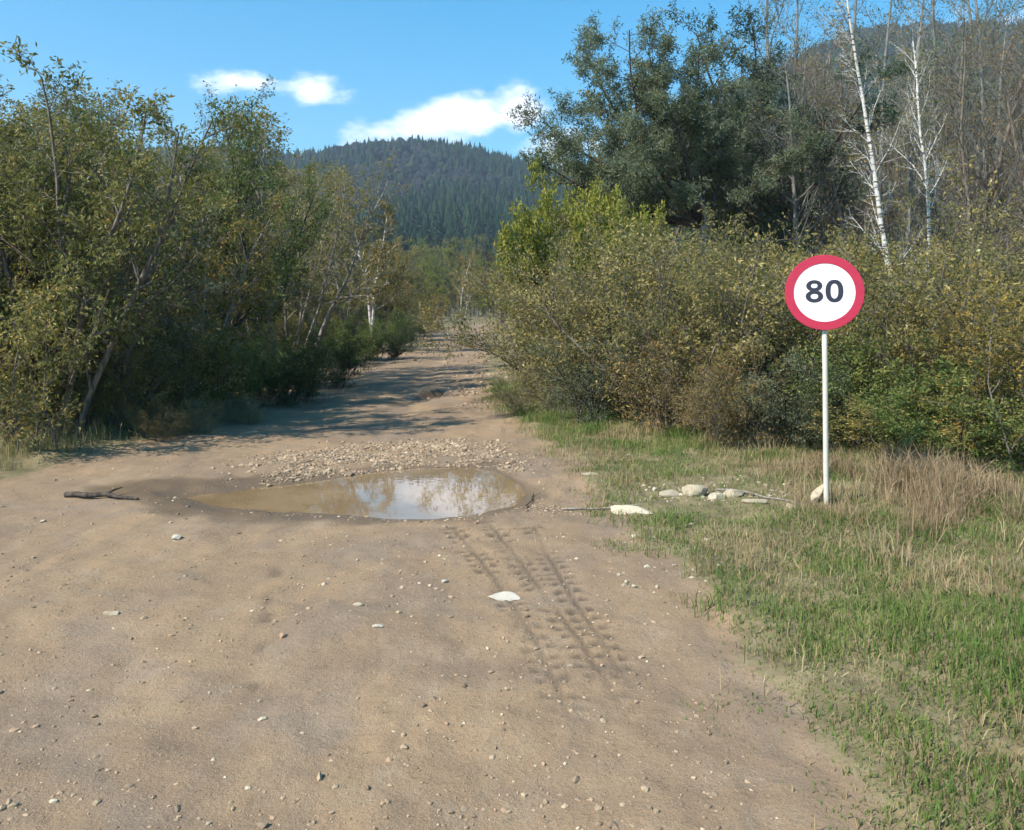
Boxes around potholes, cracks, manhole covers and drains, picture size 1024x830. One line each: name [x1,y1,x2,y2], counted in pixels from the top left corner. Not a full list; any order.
pothole [176,462,541,522]
pothole [403,389,453,401]
